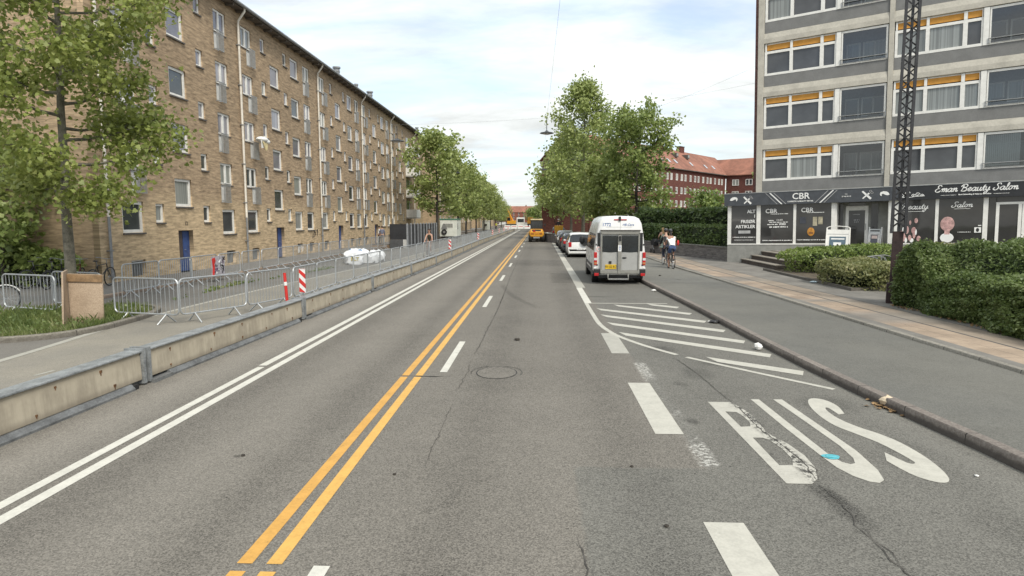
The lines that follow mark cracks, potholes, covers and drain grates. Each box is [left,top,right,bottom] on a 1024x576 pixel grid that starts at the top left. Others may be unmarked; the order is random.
manhole cover [471,366,523,379]
crack [425,250,524,467]
crack [576,540,589,576]
crack [678,360,914,576]
